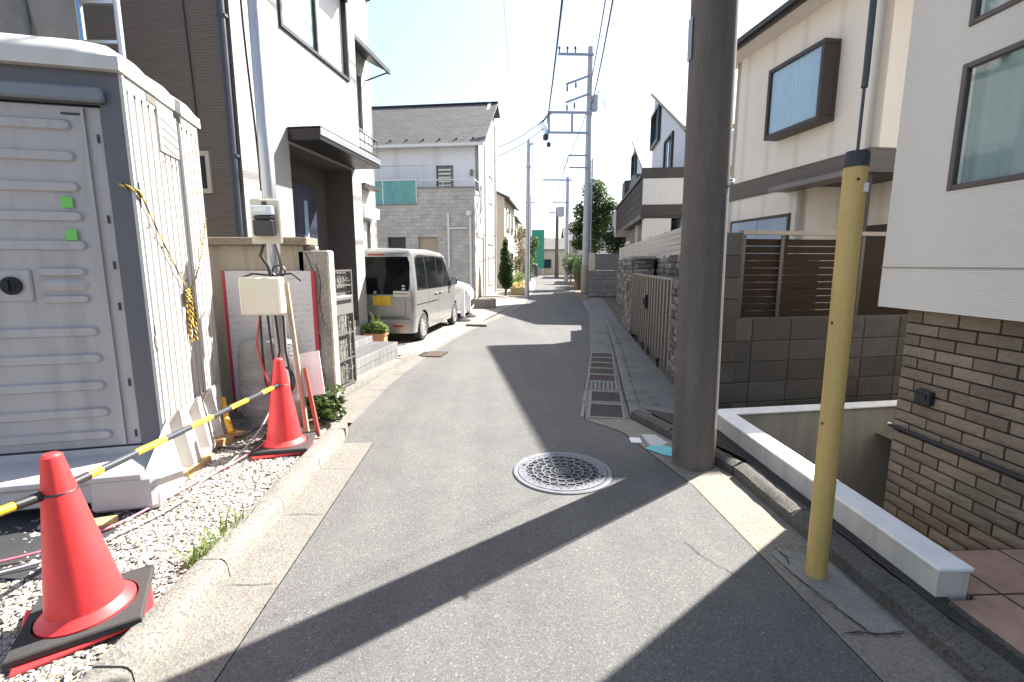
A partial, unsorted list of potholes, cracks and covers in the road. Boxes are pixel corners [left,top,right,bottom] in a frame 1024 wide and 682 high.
drain grate [586,381,618,391]
crack [774,547,908,635]
drain grate [587,374,617,382]
manhole cover [513,452,613,495]
drain grate [588,367,616,375]
